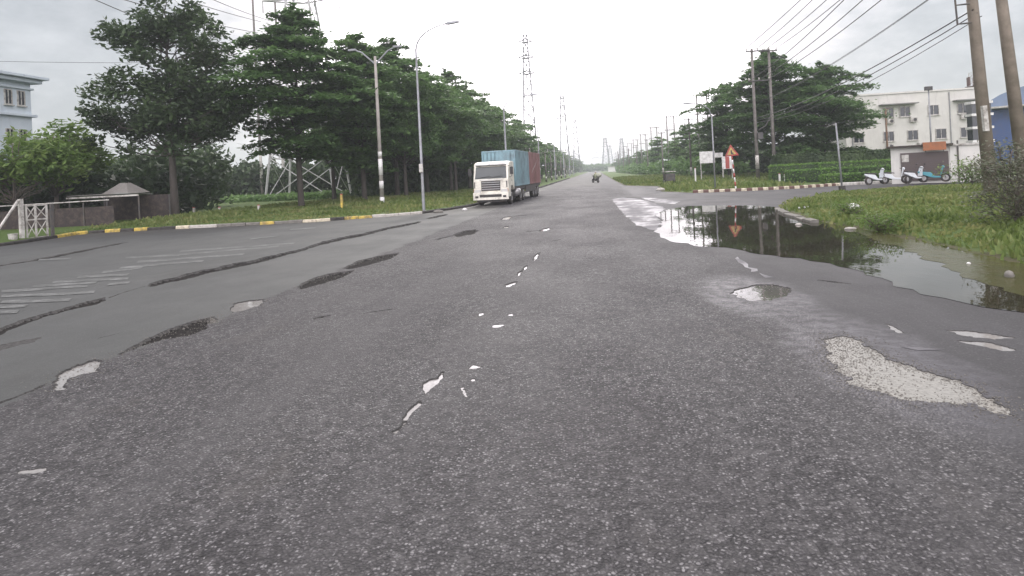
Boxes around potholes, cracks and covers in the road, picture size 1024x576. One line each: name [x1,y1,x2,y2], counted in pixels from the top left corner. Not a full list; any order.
pothole [109,317,224,359]
pothole [453,229,479,237]
pothole [284,268,358,292]
pothole [343,252,401,269]
pothole [791,330,1024,427]
pothole [220,298,267,315]
pothole [726,283,805,303]
